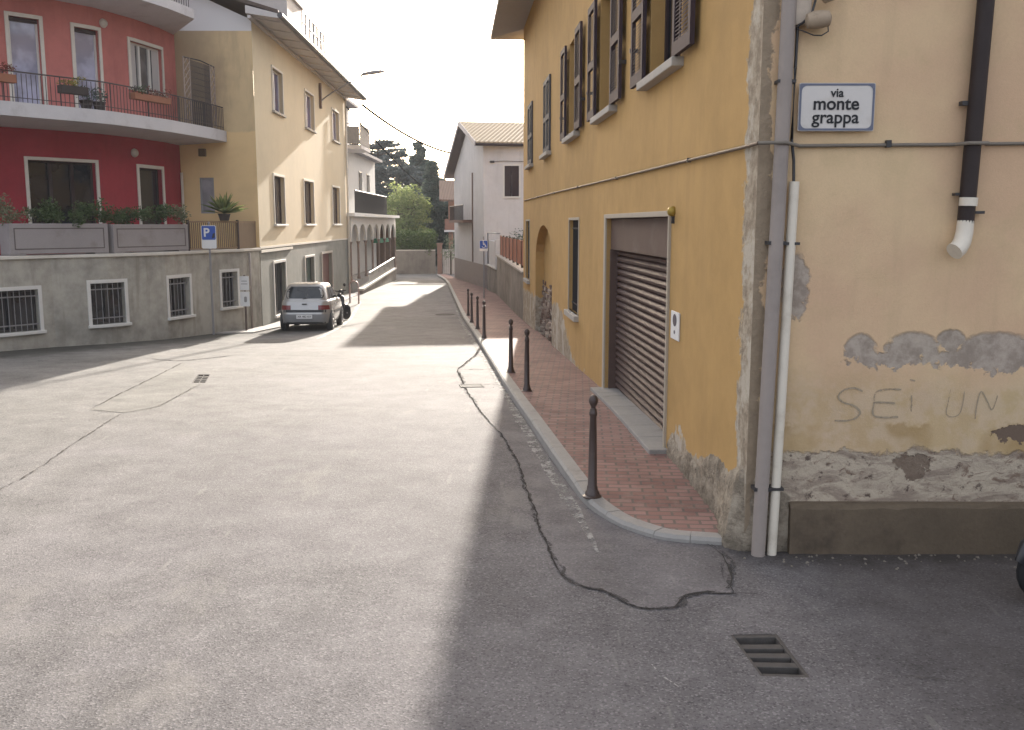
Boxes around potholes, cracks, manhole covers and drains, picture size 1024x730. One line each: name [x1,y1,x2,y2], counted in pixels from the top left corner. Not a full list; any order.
drain grate [731,634,810,678]
crack [457,356,760,610]
drain grate [192,374,210,383]
